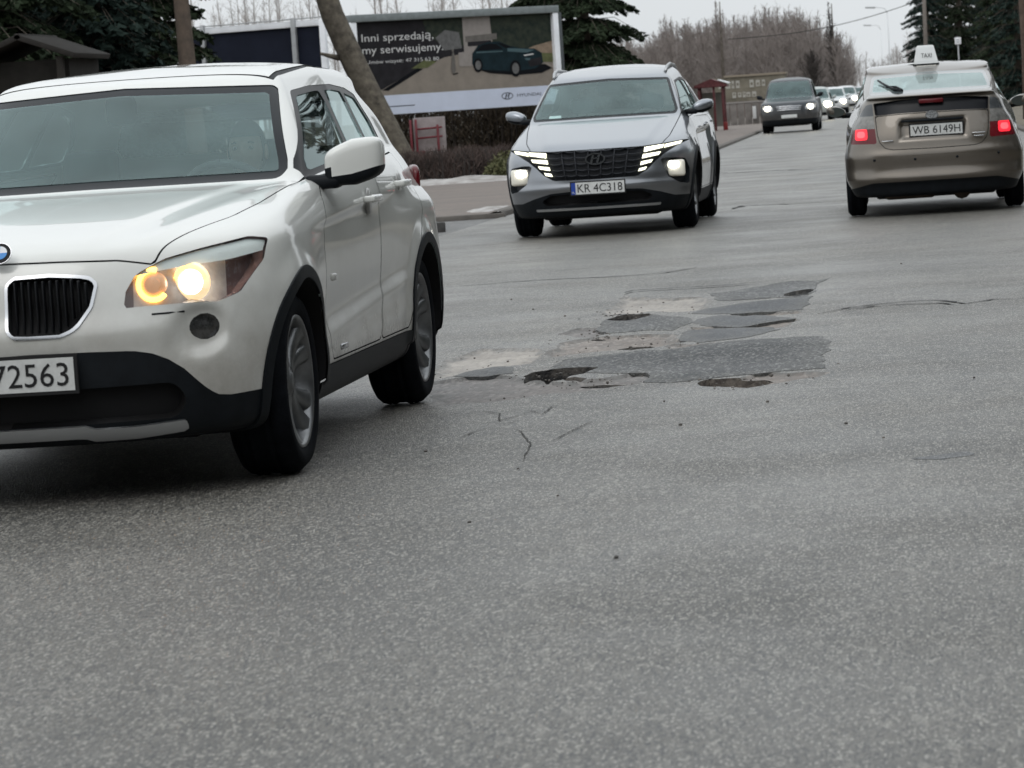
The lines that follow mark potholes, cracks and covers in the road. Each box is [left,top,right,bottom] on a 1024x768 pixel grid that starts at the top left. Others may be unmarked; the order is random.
pothole [524,367,596,388]
crack [443,405,589,461]
crack [816,298,1011,314]
pothole [698,378,774,388]
